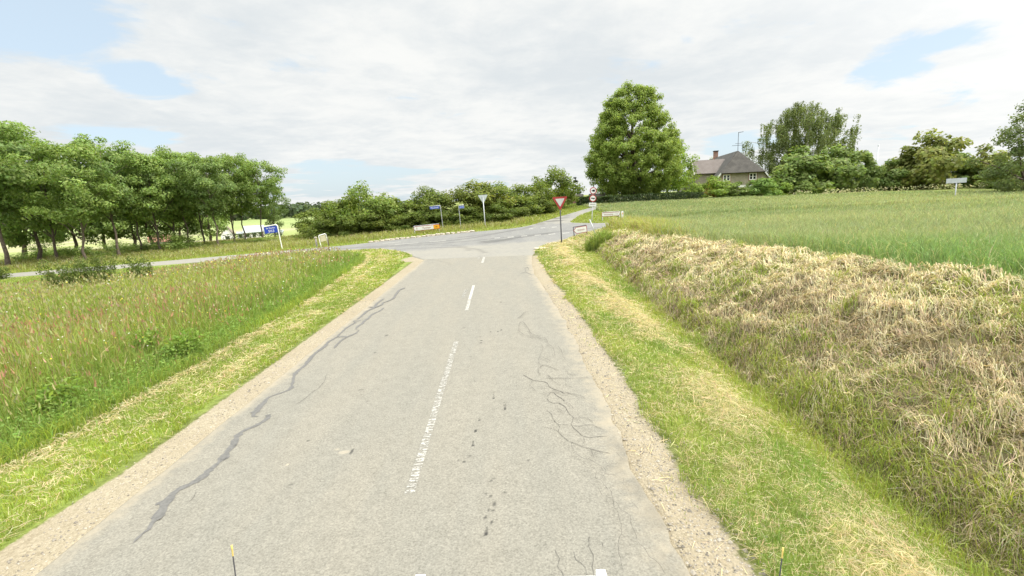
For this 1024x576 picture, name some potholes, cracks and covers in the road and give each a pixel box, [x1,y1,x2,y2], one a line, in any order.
crack [518,311,664,576]
